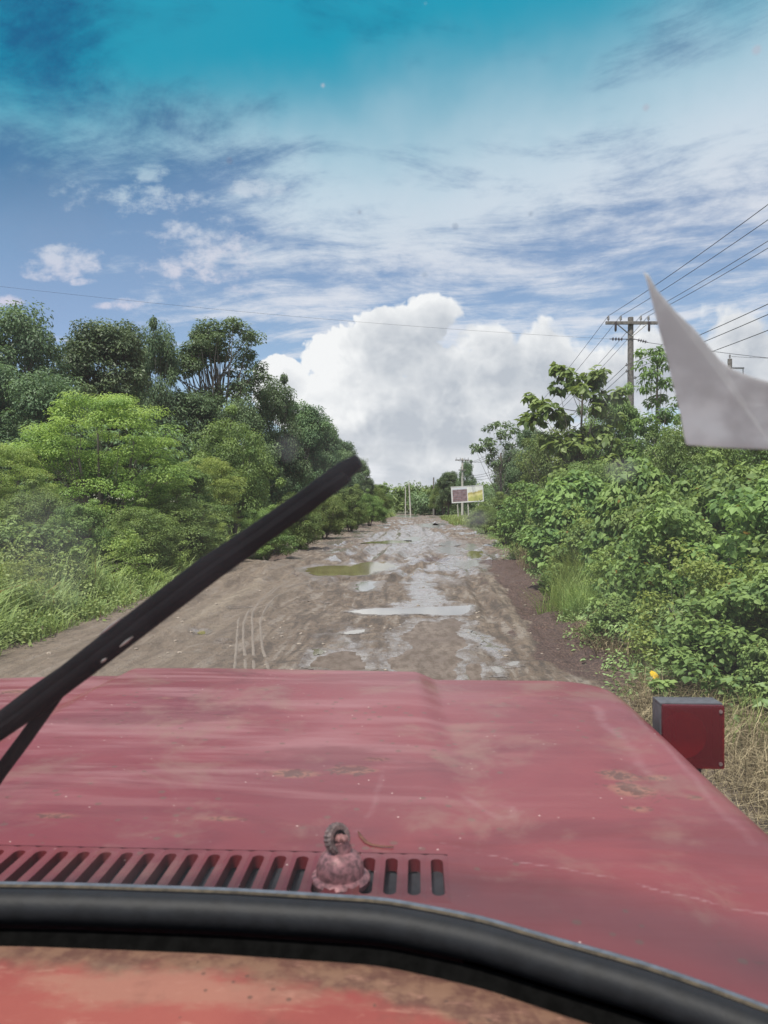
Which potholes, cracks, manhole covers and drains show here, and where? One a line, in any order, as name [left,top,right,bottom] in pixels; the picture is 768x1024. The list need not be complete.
pothole [343,603,479,617]
pothole [294,558,410,578]
pothole [462,550,490,560]
